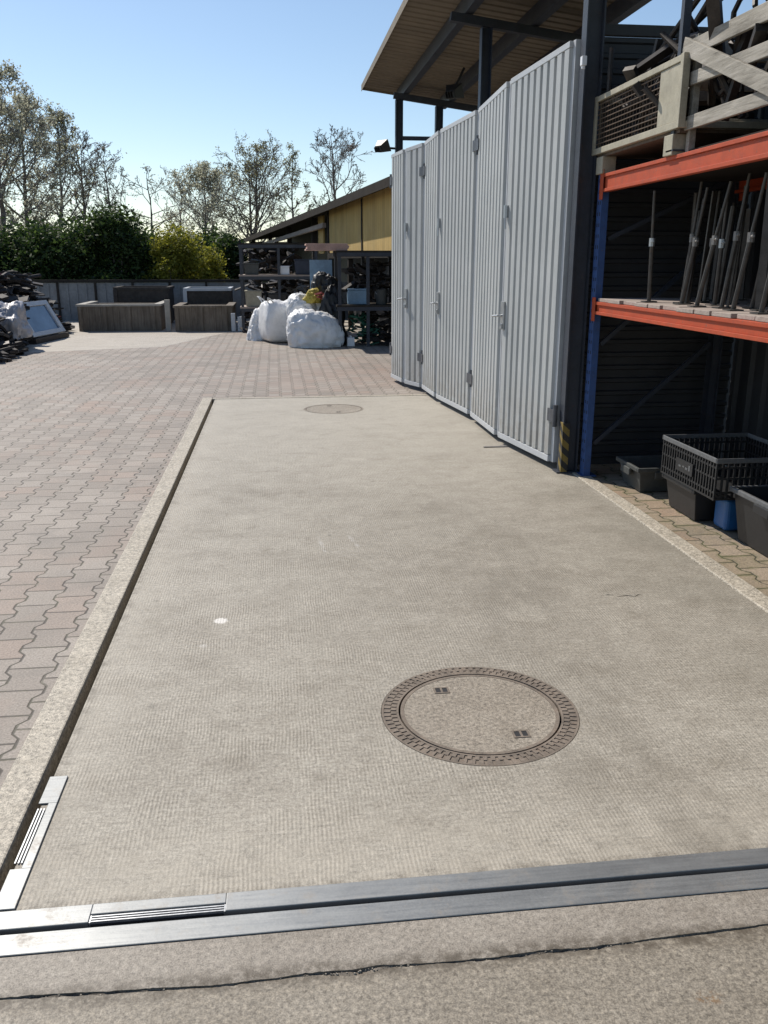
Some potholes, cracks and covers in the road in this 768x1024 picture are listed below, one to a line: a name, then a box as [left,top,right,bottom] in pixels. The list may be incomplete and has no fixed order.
manhole cover [381,667,579,766]
manhole cover [304,404,364,414]
